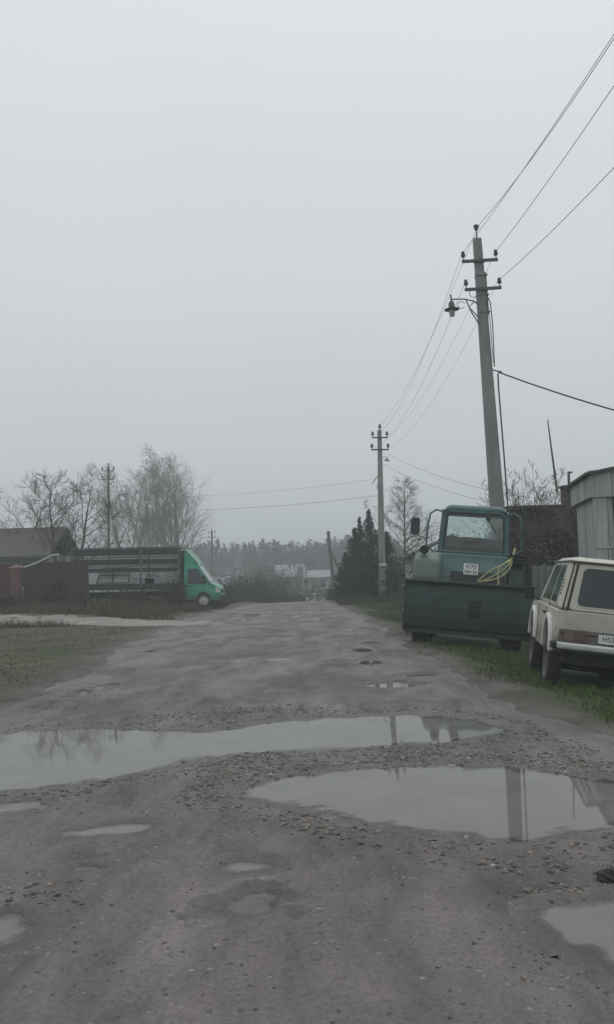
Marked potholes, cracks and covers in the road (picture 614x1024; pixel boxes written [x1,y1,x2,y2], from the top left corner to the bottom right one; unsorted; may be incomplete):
pothole [0,711,529,795]
pothole [192,850,296,881]
pothole [175,878,312,929]
pothole [354,679,439,689]
pothole [222,760,614,851]
pothole [33,815,180,844]
pothole [506,886,614,993]
pothole [0,795,70,822]
